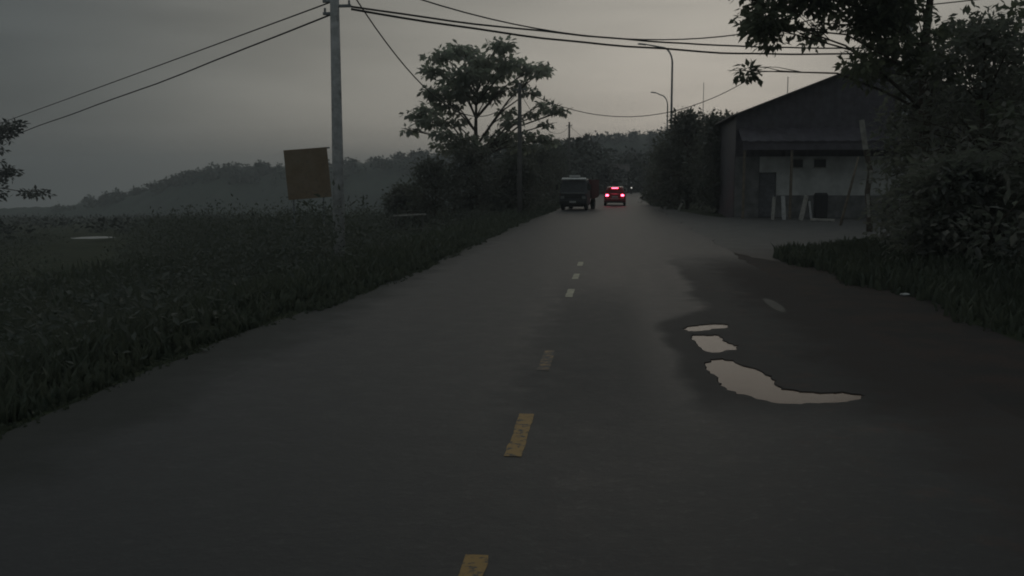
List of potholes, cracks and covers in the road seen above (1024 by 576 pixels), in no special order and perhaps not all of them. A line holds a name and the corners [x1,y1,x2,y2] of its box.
pothole [704,358,866,404]
pothole [690,334,739,353]
